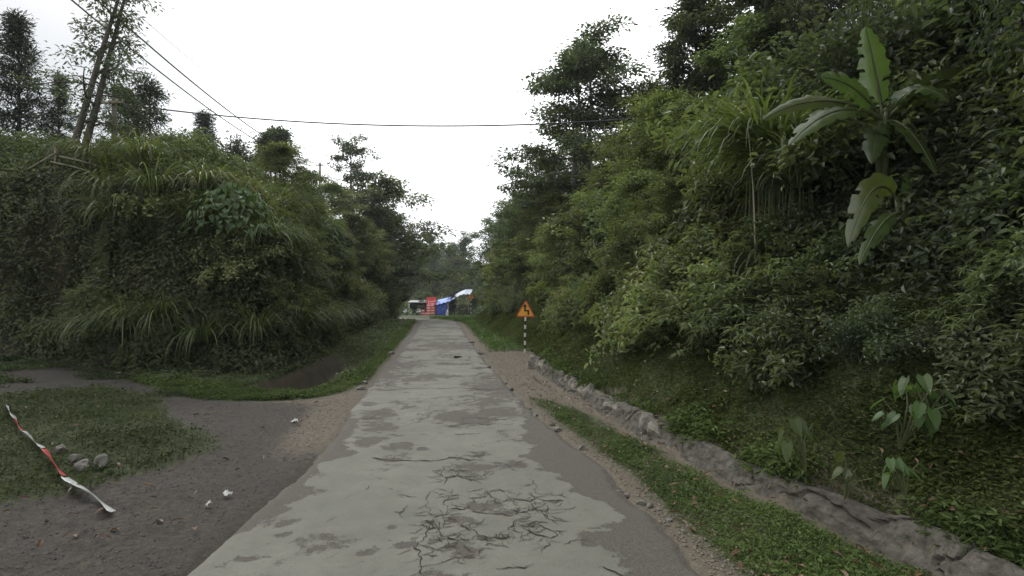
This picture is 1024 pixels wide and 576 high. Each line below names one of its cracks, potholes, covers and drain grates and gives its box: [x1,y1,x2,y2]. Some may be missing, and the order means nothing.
crack [371,444,572,576]
